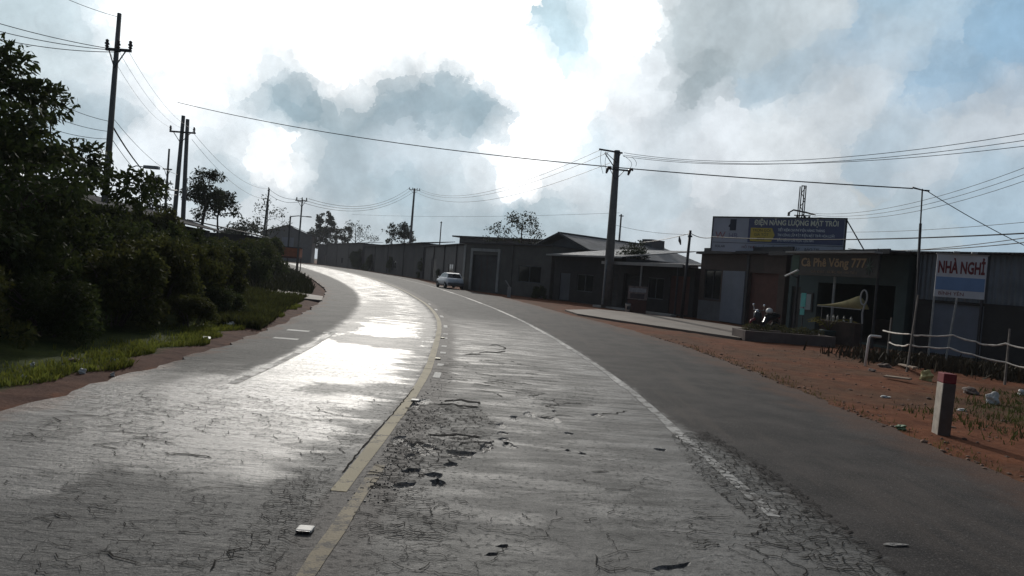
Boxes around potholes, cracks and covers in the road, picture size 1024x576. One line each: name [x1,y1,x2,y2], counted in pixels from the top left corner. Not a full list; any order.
crack [0,351,905,576]
pothole [652,562,691,573]
pothole [479,442,494,453]
pothole [404,441,440,456]
pothole [446,450,476,459]
pothole [429,478,446,487]
